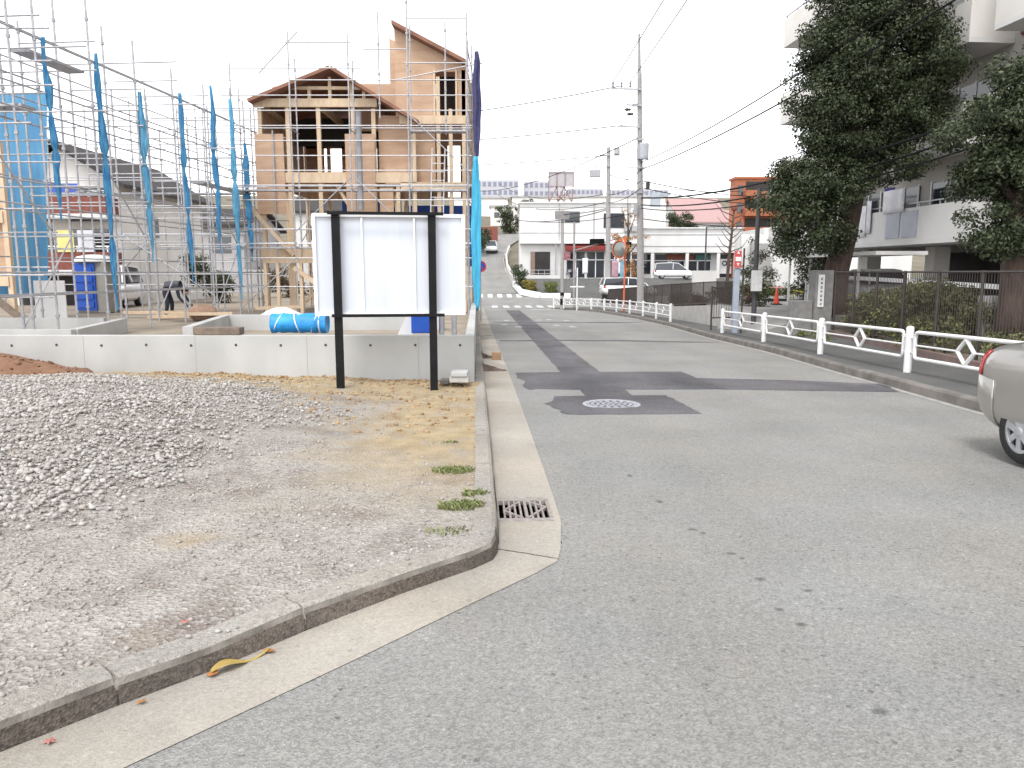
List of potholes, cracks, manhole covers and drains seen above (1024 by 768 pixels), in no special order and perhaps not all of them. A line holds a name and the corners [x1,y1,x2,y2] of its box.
drain grate [496,497,554,540]
manhole cover [583,399,641,408]
